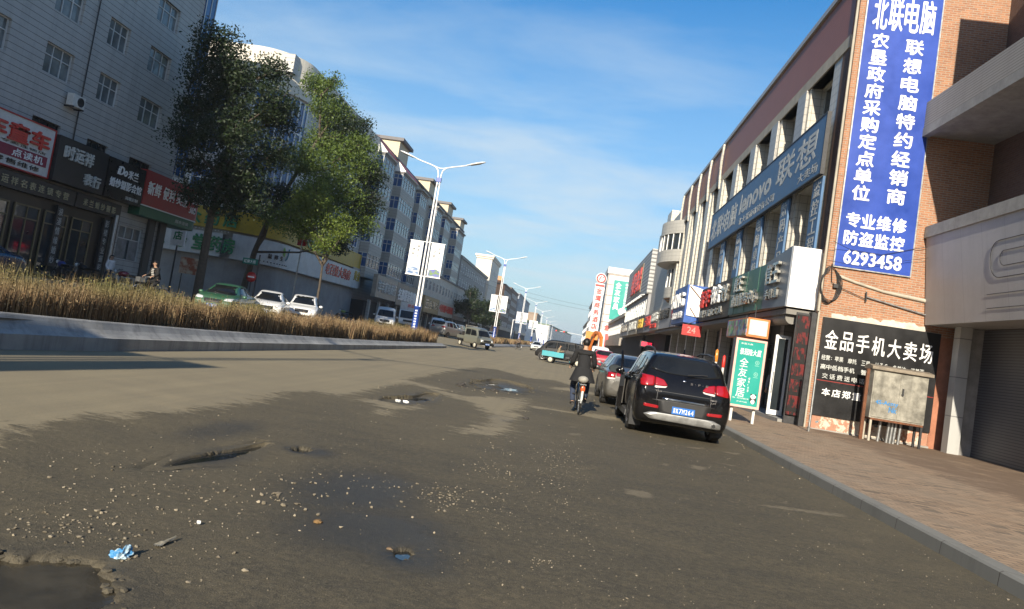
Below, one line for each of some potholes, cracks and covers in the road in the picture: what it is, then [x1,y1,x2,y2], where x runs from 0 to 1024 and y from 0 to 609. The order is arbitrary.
pothole [141,440,284,472]
pothole [372,392,445,406]
pothole [0,538,170,609]
pothole [462,377,541,394]
